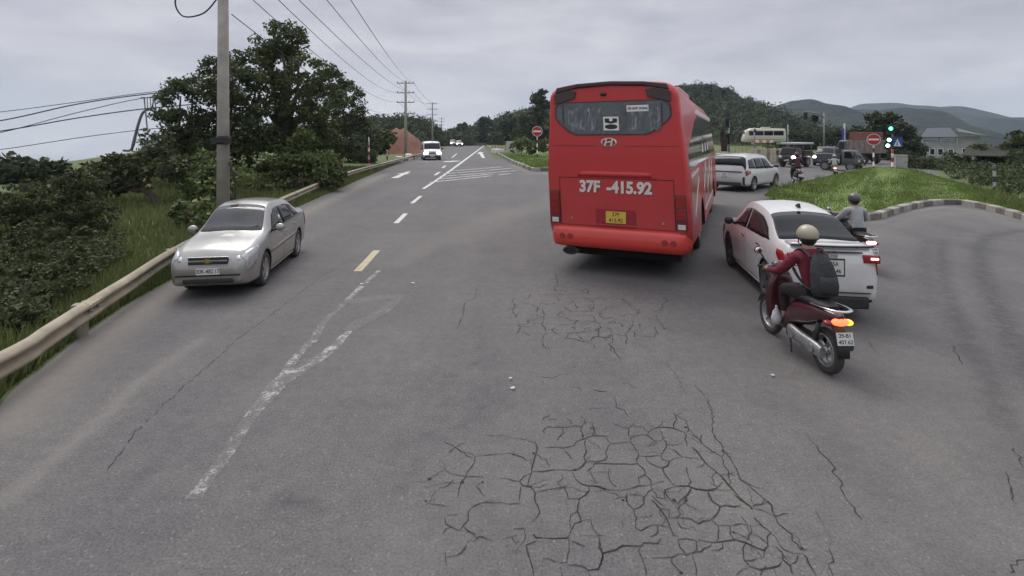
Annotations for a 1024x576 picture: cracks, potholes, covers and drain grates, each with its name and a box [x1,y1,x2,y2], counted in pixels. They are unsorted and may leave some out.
crack [808,435,862,519]
crack [507,274,680,358]
